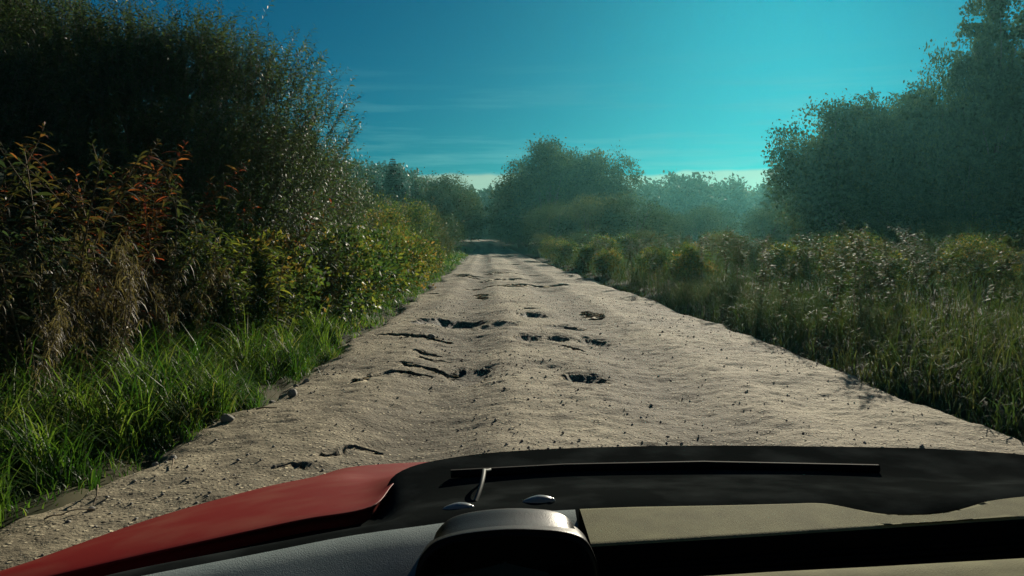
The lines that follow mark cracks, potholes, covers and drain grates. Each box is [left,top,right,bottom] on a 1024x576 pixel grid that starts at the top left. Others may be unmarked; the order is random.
pothole [466,320,523,332]
pothole [545,335,572,343]
pothole [573,338,614,348]
pothole [446,367,494,388]
pothole [558,373,612,386]
pothole [513,334,541,343]
pothole [401,316,498,331]
